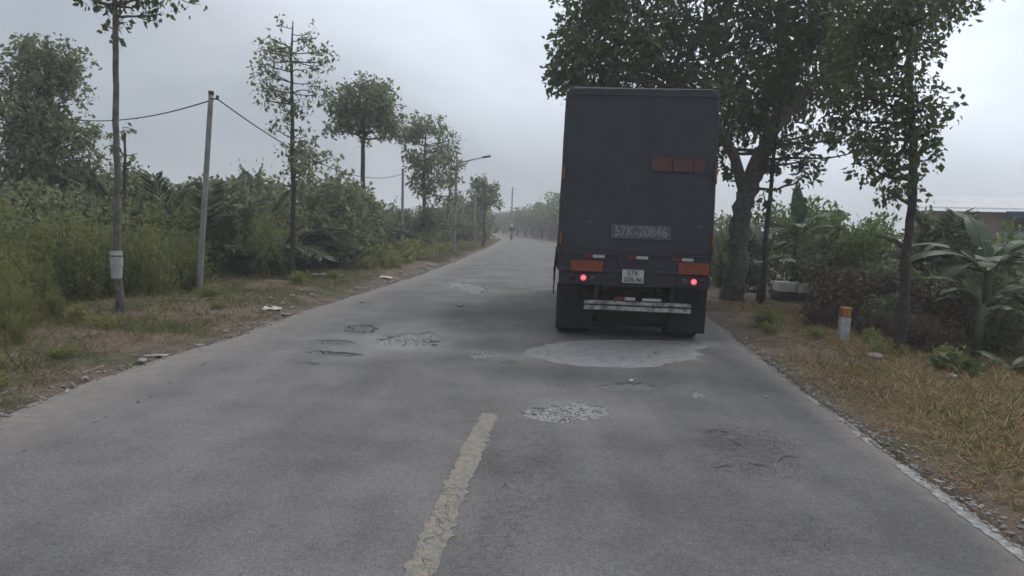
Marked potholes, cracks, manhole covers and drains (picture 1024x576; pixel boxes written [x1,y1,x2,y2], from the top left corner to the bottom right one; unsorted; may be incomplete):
pothole [444,282,487,294]
pothole [375,332,441,347]
pothole [520,402,612,423]
crack [695,425,802,479]
pothole [594,382,656,391]
pothole [344,325,379,334]
